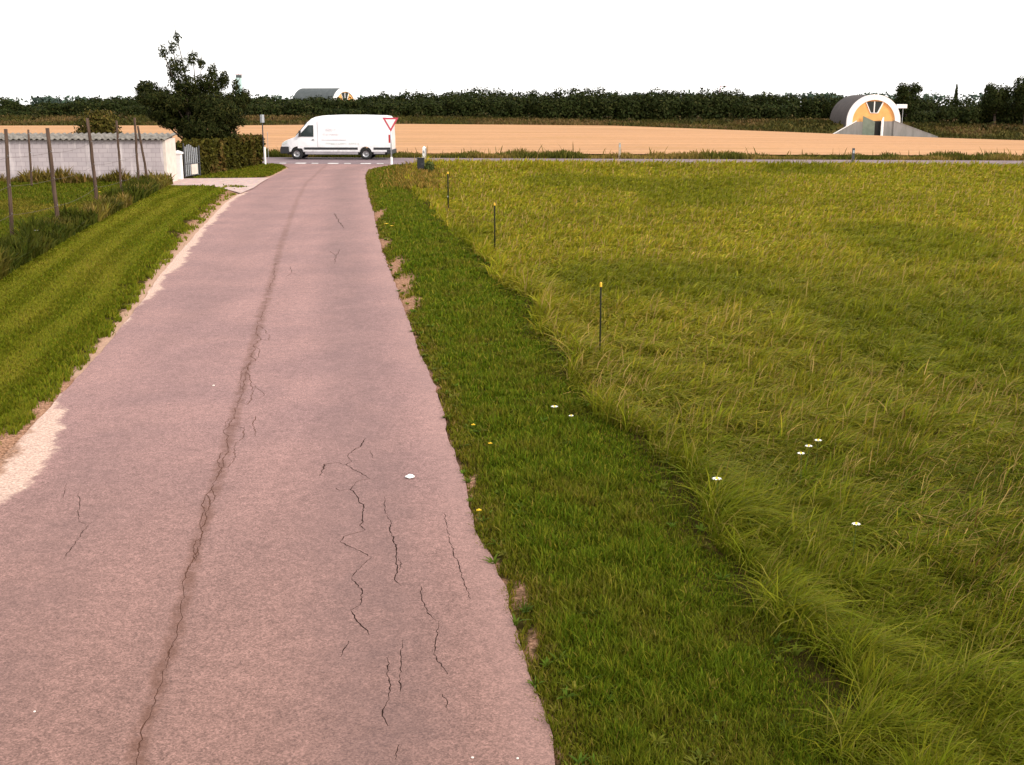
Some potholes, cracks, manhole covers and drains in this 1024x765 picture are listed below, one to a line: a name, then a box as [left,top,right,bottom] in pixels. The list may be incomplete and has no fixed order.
crack [382,641,403,726]
crack [319,439,373,654]
crack [384,501,401,583]
crack [136,263,276,765]
crack [420,587,448,674]
